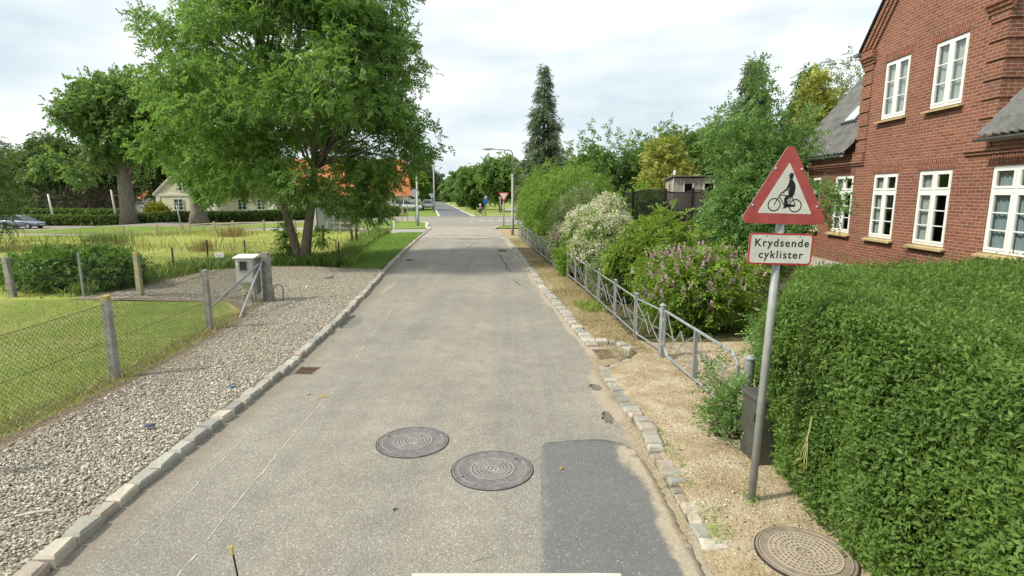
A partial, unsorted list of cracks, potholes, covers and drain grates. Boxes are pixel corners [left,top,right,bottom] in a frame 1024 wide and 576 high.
manhole cover [754,526,860,576]
pothole [601,411,614,424]
drain grate [592,349,616,367]
drain grate [293,367,321,375]
manhole cover [376,427,449,459]
manhole cover [451,450,534,491]
